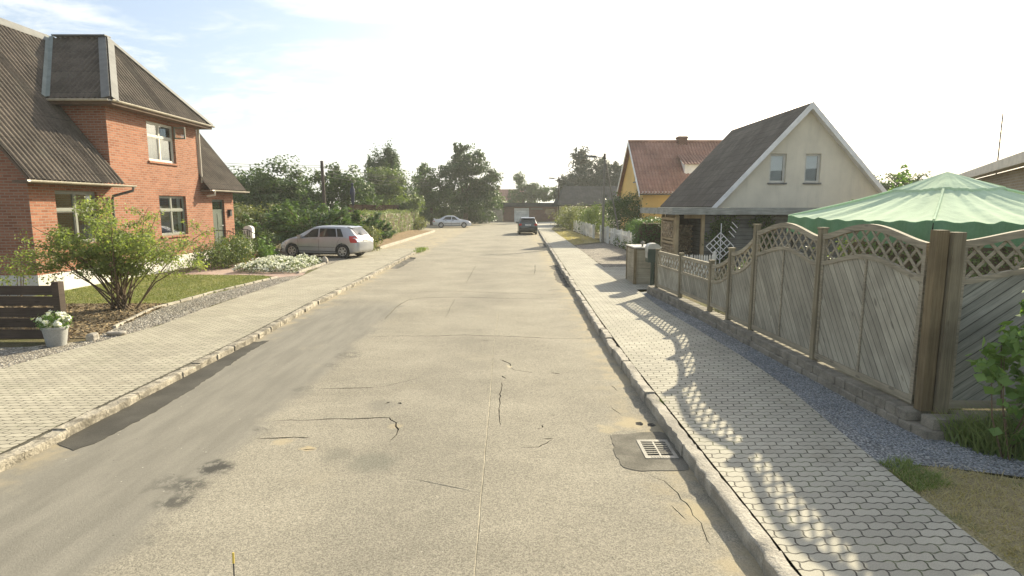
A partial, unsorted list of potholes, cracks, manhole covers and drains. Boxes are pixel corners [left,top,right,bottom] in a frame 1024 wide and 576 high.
crack [378,310,577,576]
crack [650,475,711,545]
drain grate [636,440,679,459]
crack [259,402,399,450]
